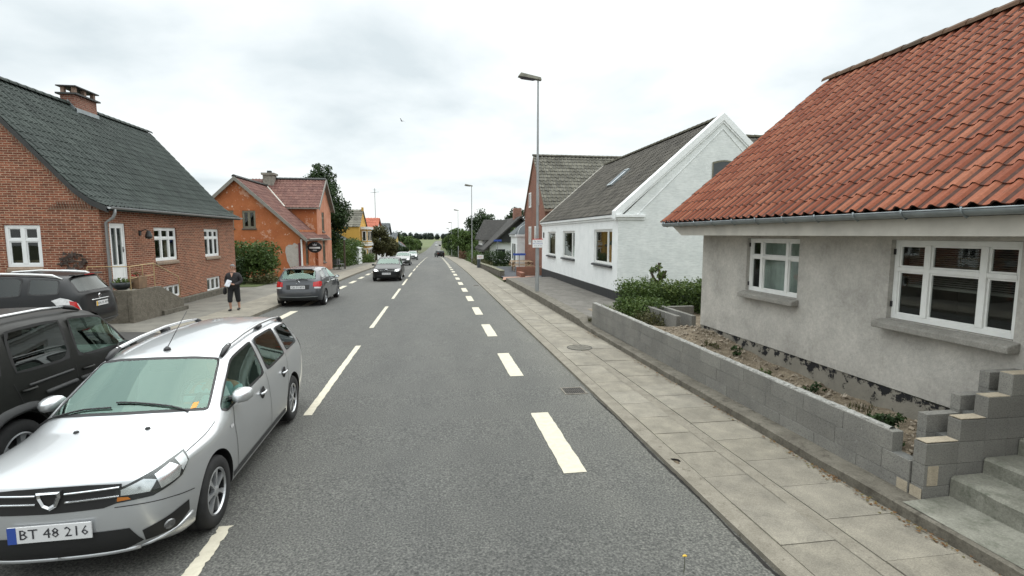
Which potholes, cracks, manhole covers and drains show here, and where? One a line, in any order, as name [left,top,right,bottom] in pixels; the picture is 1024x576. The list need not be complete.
drain grate [560,387,588,395]
